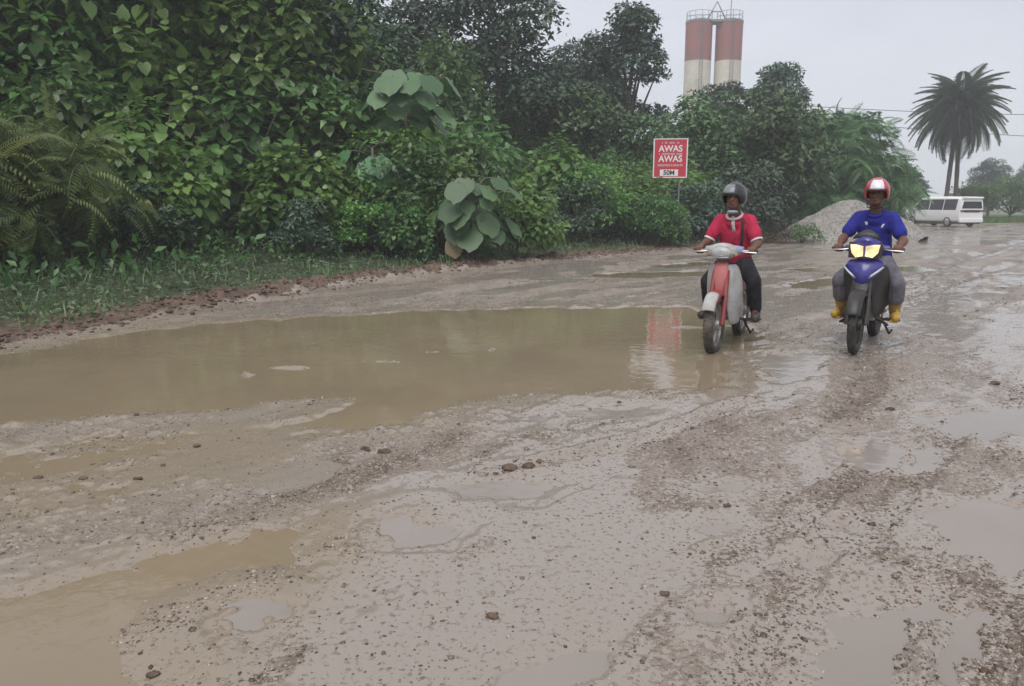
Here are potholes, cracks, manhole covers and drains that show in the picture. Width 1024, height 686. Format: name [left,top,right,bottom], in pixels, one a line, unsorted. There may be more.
pothole [0,304,767,438]
pothole [833,433,946,474]
pothole [0,509,360,686]
pothole [762,569,996,686]
pothole [883,495,1024,577]
pothole [907,404,1024,442]
pothole [435,470,587,504]
pothole [370,507,471,549]
